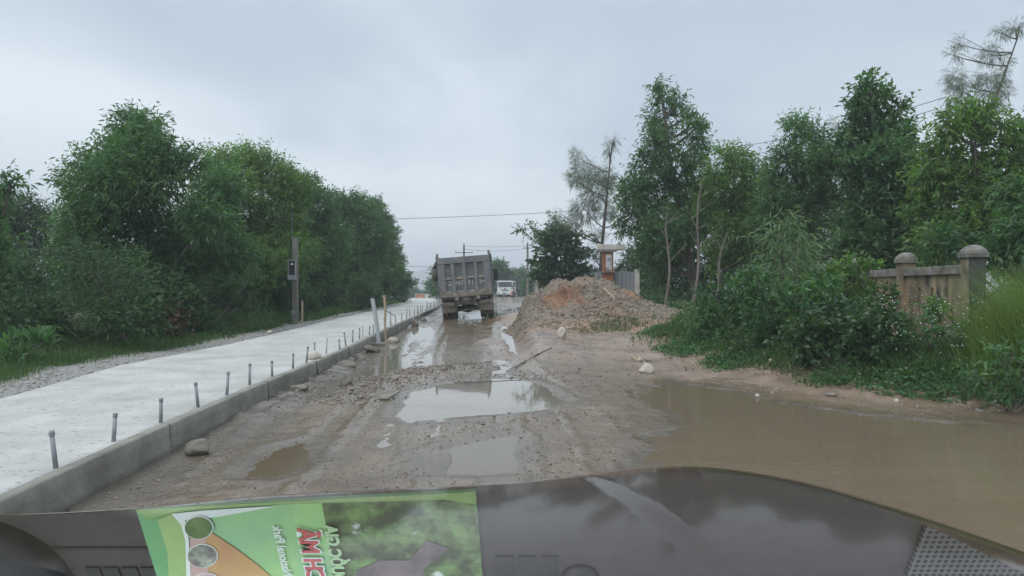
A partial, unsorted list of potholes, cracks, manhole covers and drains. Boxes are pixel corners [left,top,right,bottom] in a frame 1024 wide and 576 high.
pothole [412,432,535,478]
pothole [387,378,576,425]
pothole [228,438,324,480]
